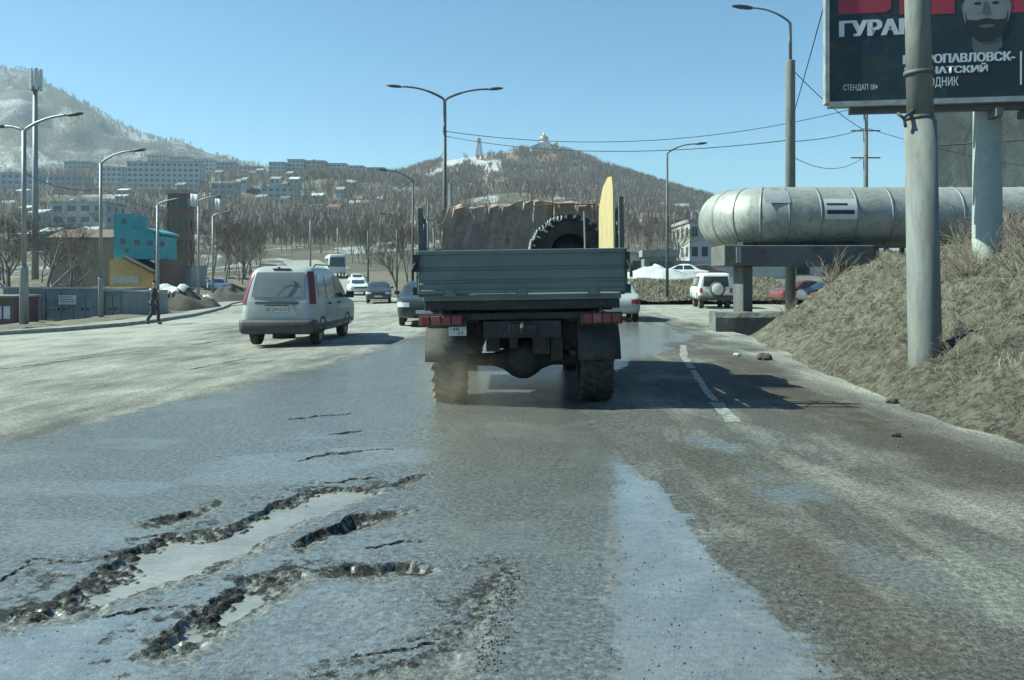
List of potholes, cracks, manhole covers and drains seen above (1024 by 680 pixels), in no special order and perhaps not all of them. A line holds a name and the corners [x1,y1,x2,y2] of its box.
pothole [0,484,390,637]
crack [288,413,394,484]
pothole [286,509,416,555]
pothole [301,561,444,584]
crack [350,641,438,659]
pothole [127,565,319,669]
